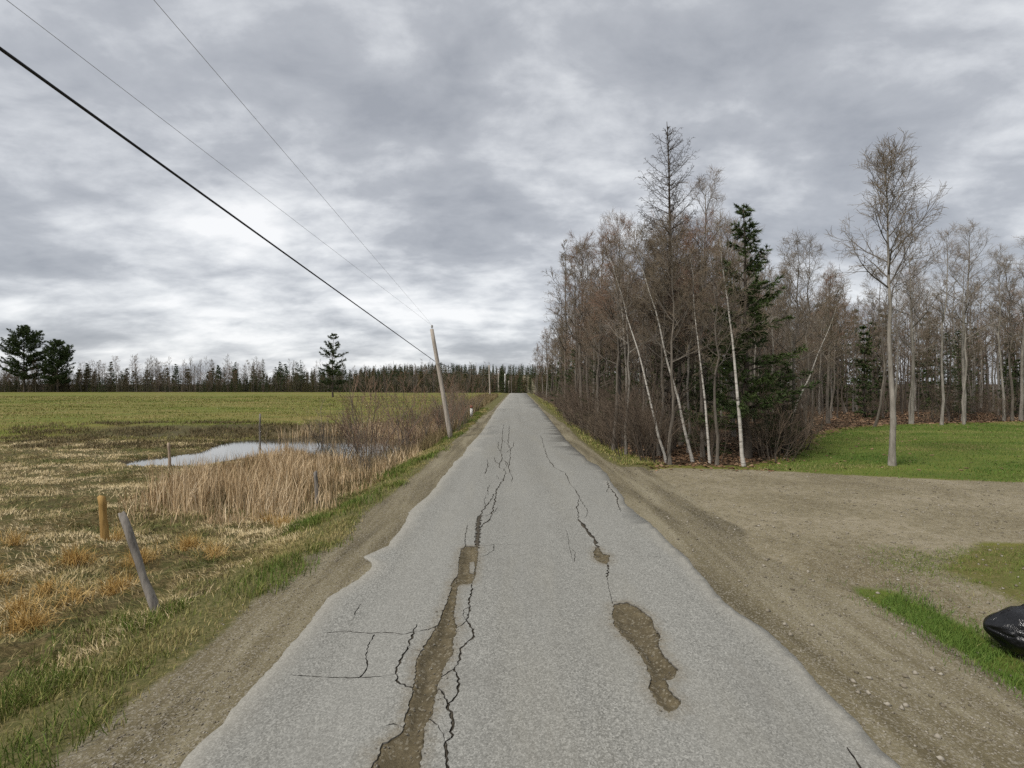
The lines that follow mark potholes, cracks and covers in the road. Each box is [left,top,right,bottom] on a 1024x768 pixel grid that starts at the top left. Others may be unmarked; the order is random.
crack [541,437,648,604]
crack [293,425,514,768]
pothole [608,601,688,713]
pothole [371,545,481,768]
pothole [593,547,614,564]
